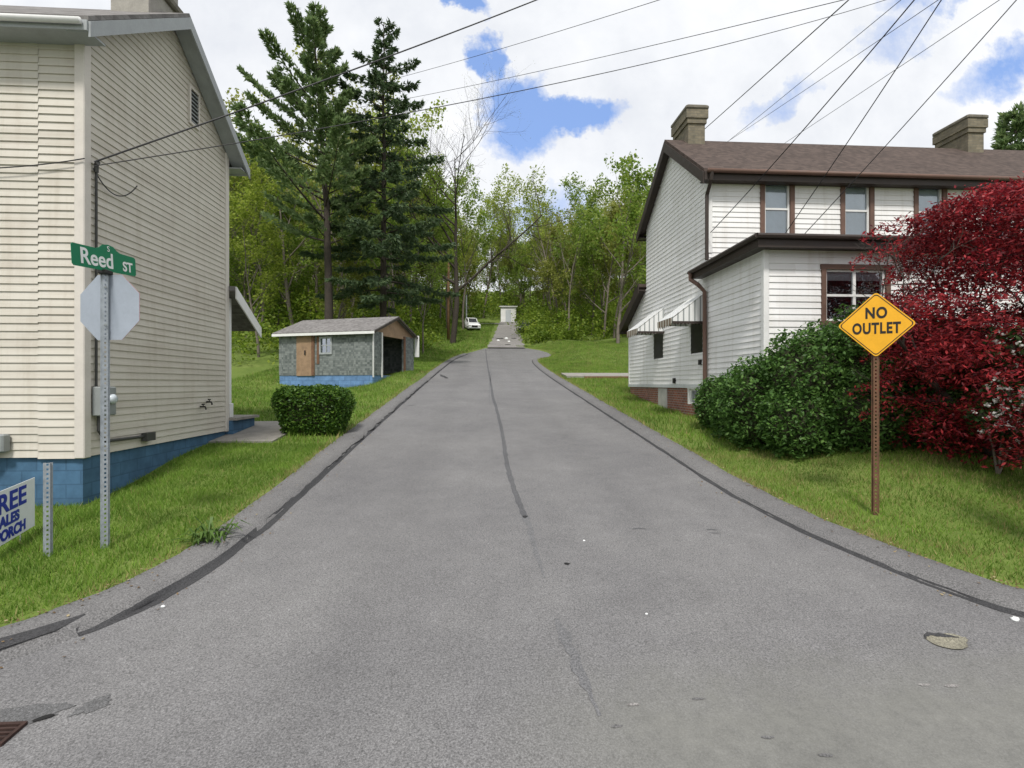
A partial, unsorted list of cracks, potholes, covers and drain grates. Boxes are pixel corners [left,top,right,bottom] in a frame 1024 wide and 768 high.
crack [555,618,602,716]
drain grate [0,721,28,746]
